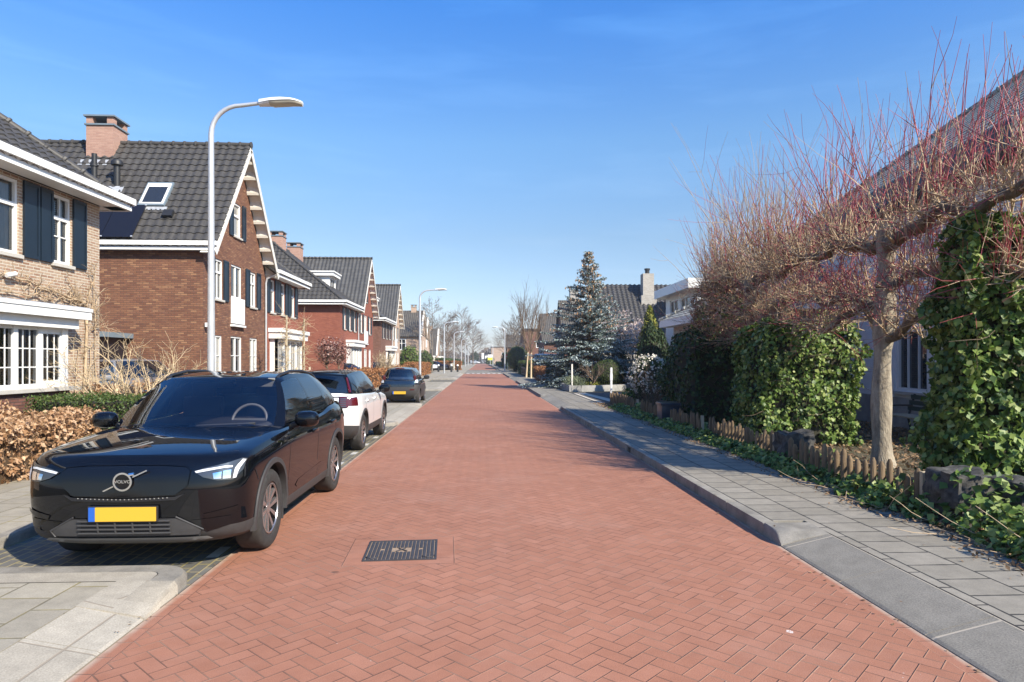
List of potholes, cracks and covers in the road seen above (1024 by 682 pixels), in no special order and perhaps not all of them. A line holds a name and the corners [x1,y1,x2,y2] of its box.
manhole cover [362,539,438,562]
